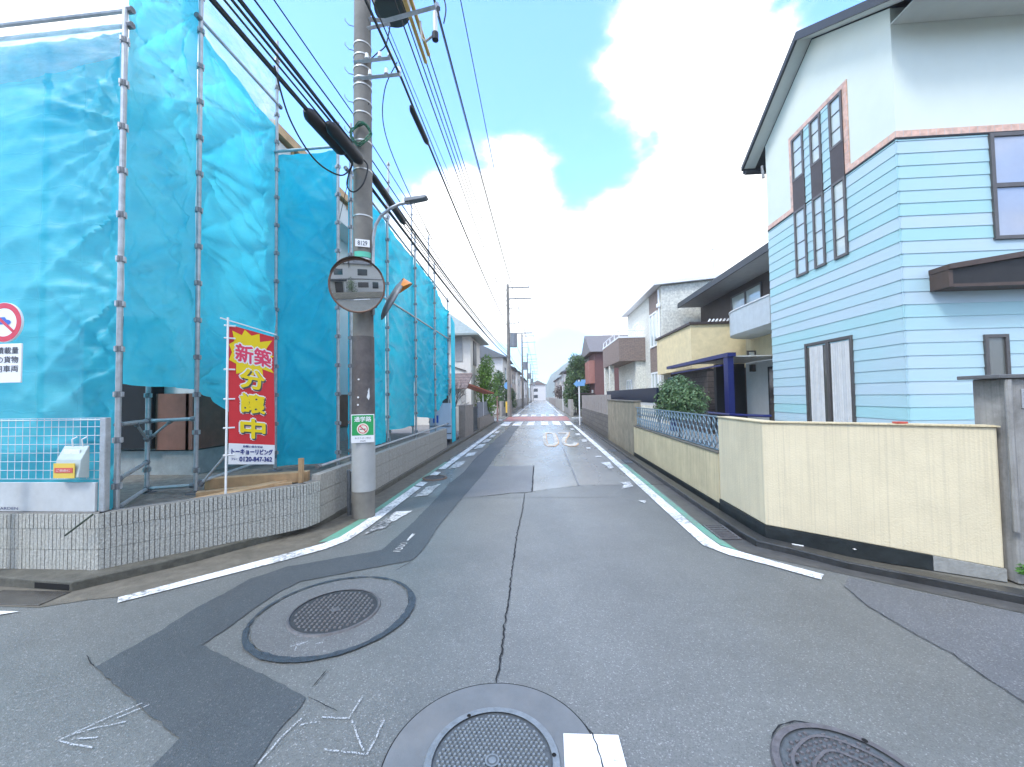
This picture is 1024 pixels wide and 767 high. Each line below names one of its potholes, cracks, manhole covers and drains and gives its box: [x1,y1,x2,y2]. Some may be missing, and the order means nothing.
crack [495,465,535,683]
manhole cover [423,707,562,767]
manhole cover [285,589,381,637]
manhole cover [770,723,911,767]
drain grate [702,524,742,540]
